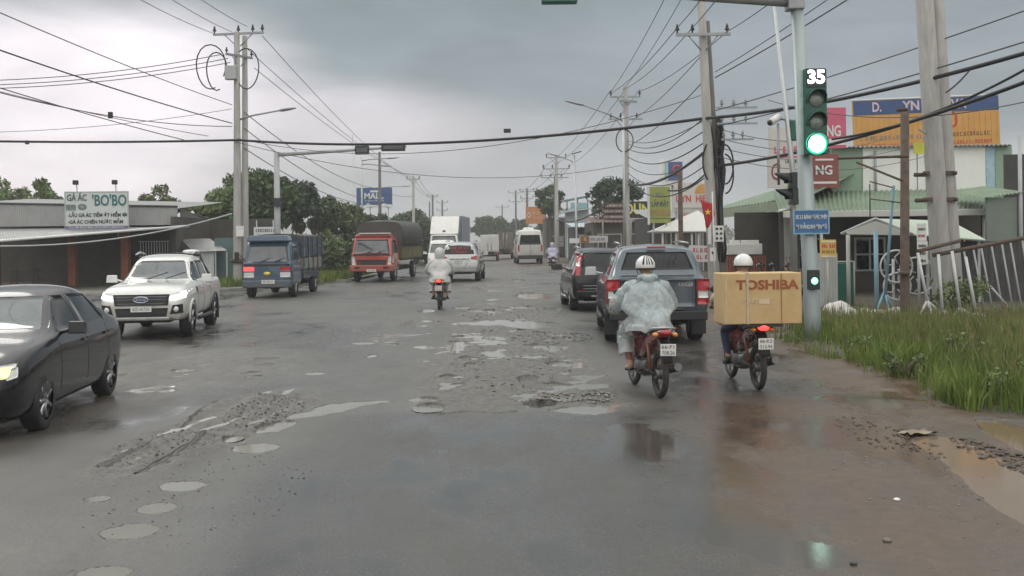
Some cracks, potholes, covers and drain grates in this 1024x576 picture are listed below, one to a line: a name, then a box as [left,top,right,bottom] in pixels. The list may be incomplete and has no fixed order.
pothole [909,436,1024,525]
pothole [128,501,184,516]
pothole [77,494,120,504]
pothole [152,479,214,494]
pothole [407,402,453,415]
pothole [90,522,168,542]
pothole [215,432,251,445]
pothole [65,564,142,576]
pothole [225,442,286,455]
crack [92,400,218,474]
pothole [458,319,562,330]
pothole [518,397,564,410]
